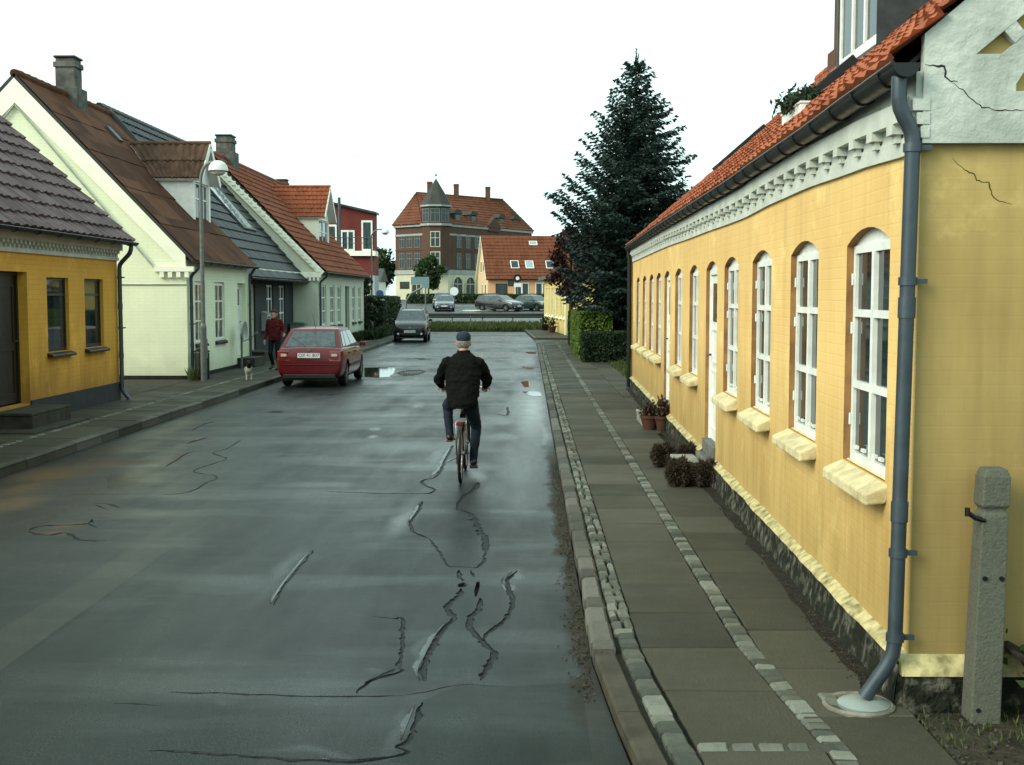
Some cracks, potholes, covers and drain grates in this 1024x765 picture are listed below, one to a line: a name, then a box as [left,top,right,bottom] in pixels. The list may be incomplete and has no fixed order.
crack [113,445,516,706]
crack [29,494,121,542]
crack [165,422,241,495]
